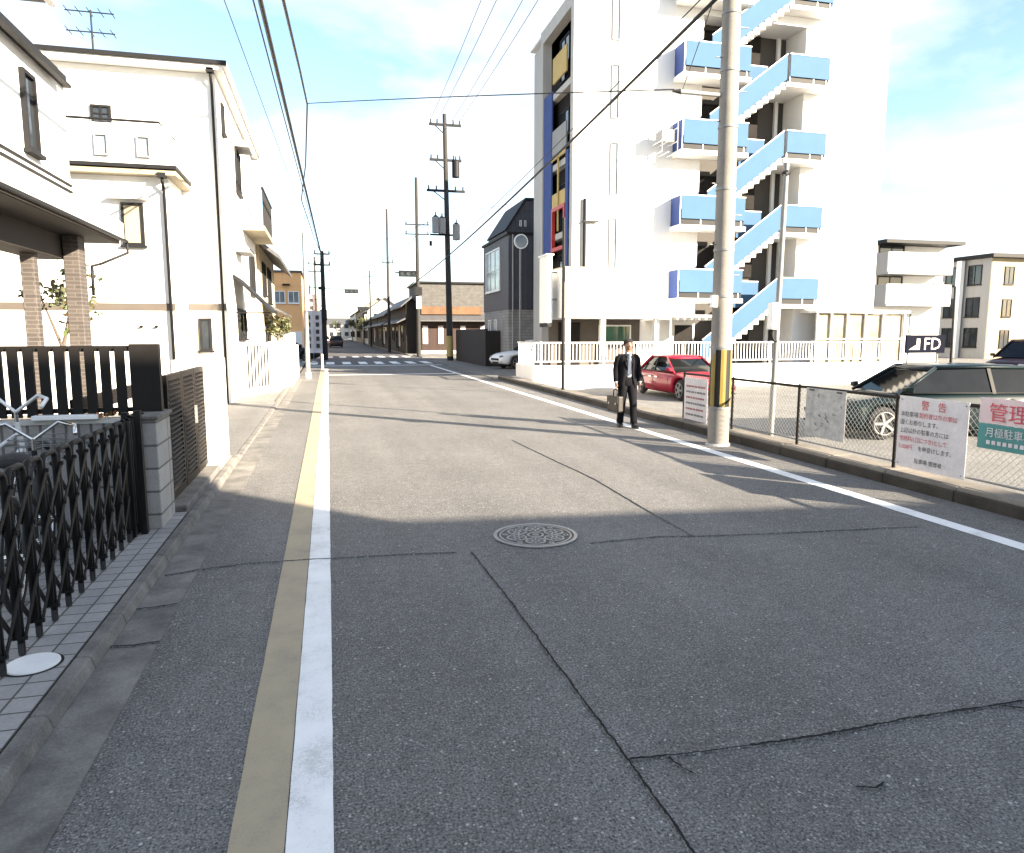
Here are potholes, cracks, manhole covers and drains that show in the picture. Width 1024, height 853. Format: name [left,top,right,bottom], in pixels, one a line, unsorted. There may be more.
utility cover [6,652,64,677]
manhole cover [493,523,578,548]
crack [165,440,1024,853]
